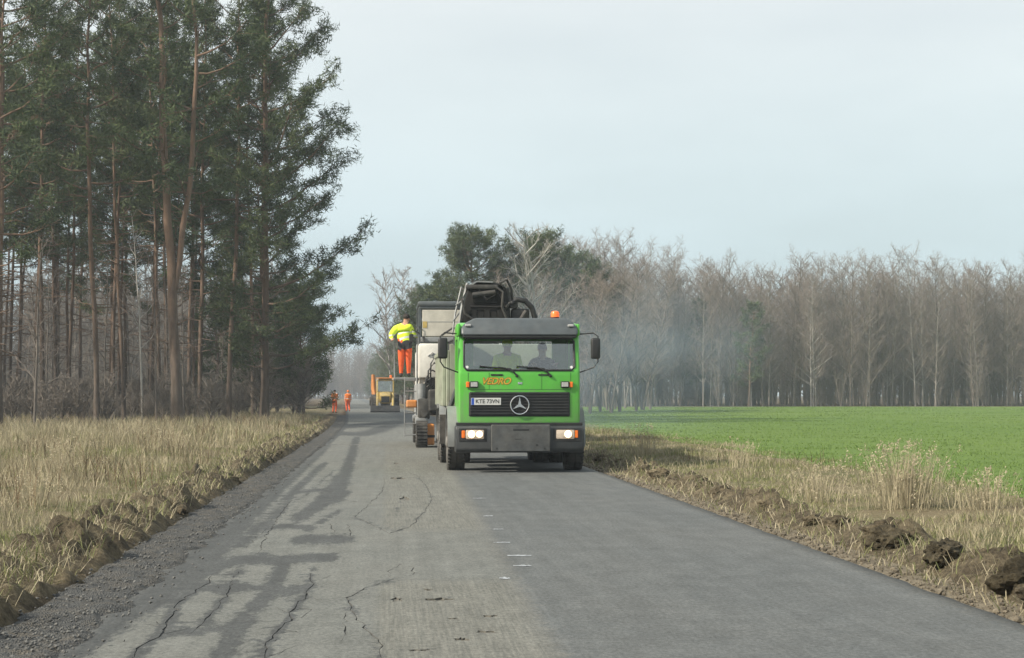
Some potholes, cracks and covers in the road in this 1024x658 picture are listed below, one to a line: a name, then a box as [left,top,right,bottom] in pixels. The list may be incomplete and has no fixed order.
crack [246,501,291,553]
crack [328,469,431,536]
crack [341,564,458,656]
crack [119,572,239,657]
crack [200,574,329,658]
